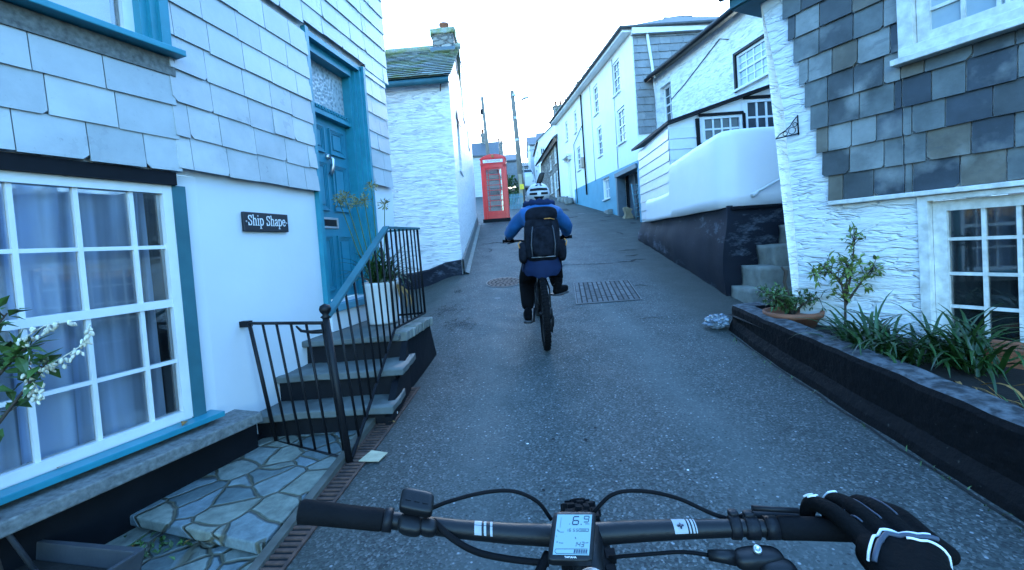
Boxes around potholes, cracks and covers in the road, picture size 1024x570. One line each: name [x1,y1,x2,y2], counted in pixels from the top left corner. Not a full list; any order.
manhole cover [486,277,519,287]
